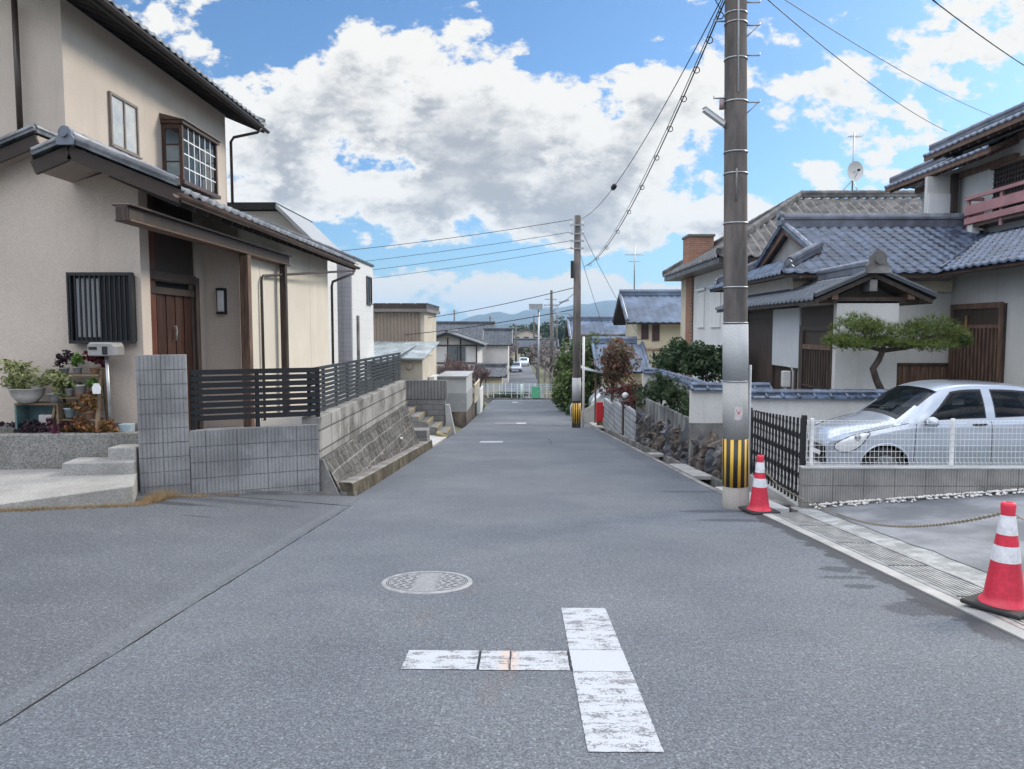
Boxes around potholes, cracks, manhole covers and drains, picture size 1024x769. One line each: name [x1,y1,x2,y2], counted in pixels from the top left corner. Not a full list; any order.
drain grate [884,565,984,598]
drain grate [835,542,929,567]
manhole cover [381,571,473,594]
drain grate [772,512,831,526]
drain grate [797,525,875,544]
